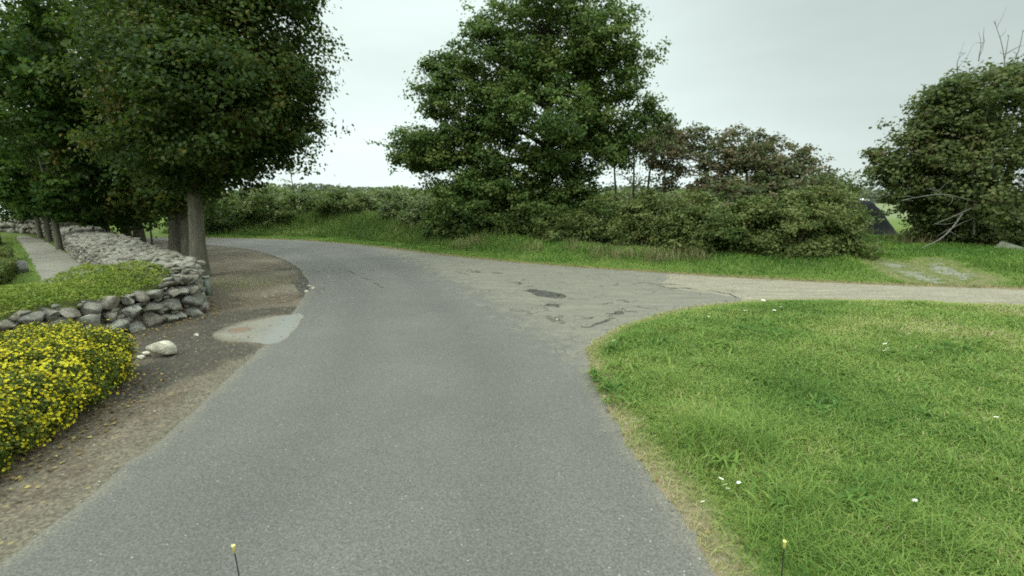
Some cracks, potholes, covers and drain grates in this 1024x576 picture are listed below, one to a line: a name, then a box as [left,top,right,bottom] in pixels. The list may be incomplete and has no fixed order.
crack [648,283,743,300]
crack [581,300,650,328]
